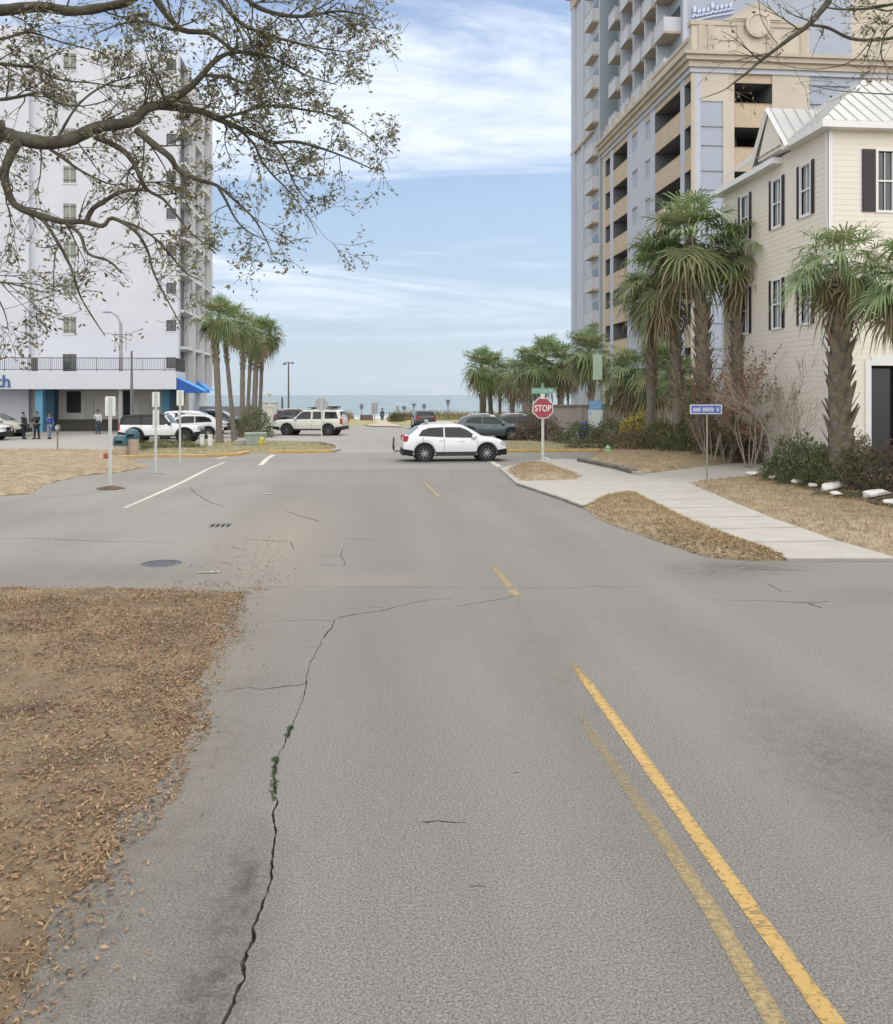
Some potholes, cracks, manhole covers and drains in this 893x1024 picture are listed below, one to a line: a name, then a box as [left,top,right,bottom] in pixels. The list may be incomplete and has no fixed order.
crack [221,596,511,1024]
crack [736,568,828,608]
